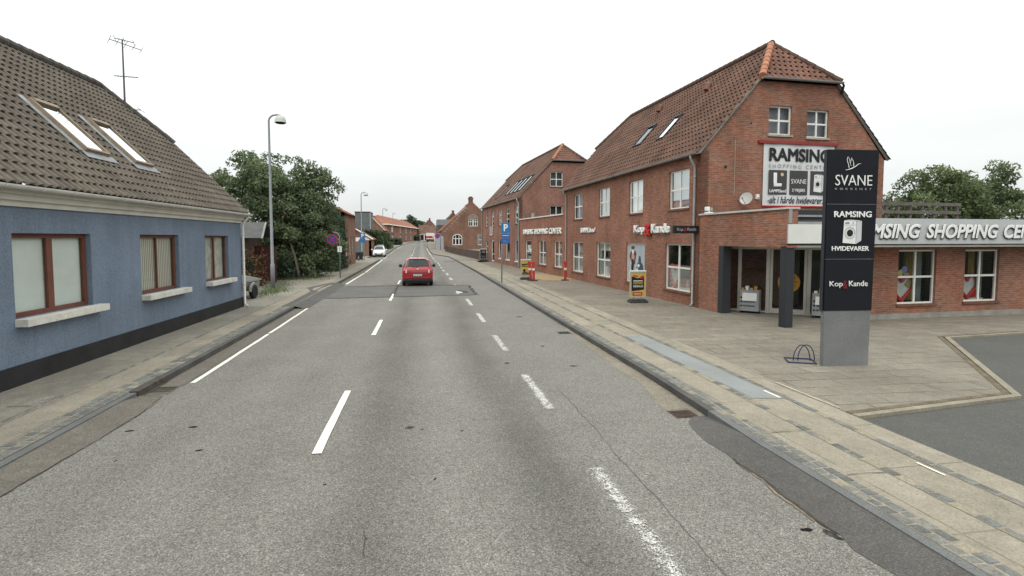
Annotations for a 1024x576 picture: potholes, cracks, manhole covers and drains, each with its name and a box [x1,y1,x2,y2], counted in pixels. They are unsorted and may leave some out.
drain grate [667,410,697,419]
